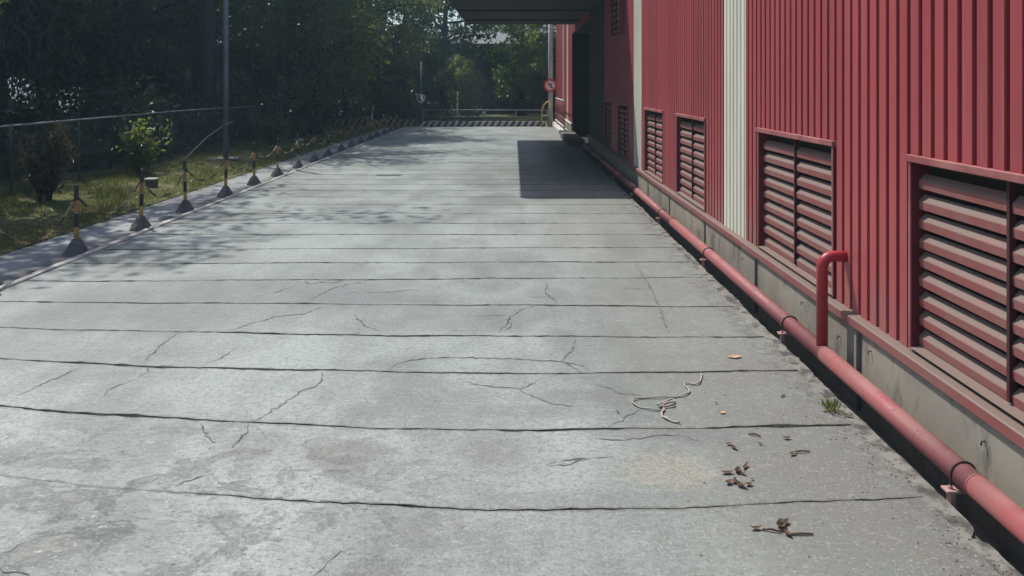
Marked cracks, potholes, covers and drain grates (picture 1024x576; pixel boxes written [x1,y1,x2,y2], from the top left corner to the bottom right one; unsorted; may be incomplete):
crack [103,333,178,396]
crack [633,261,669,331]
crack [201,372,323,447]
crack [489,282,558,332]
crack [388,340,589,406]
